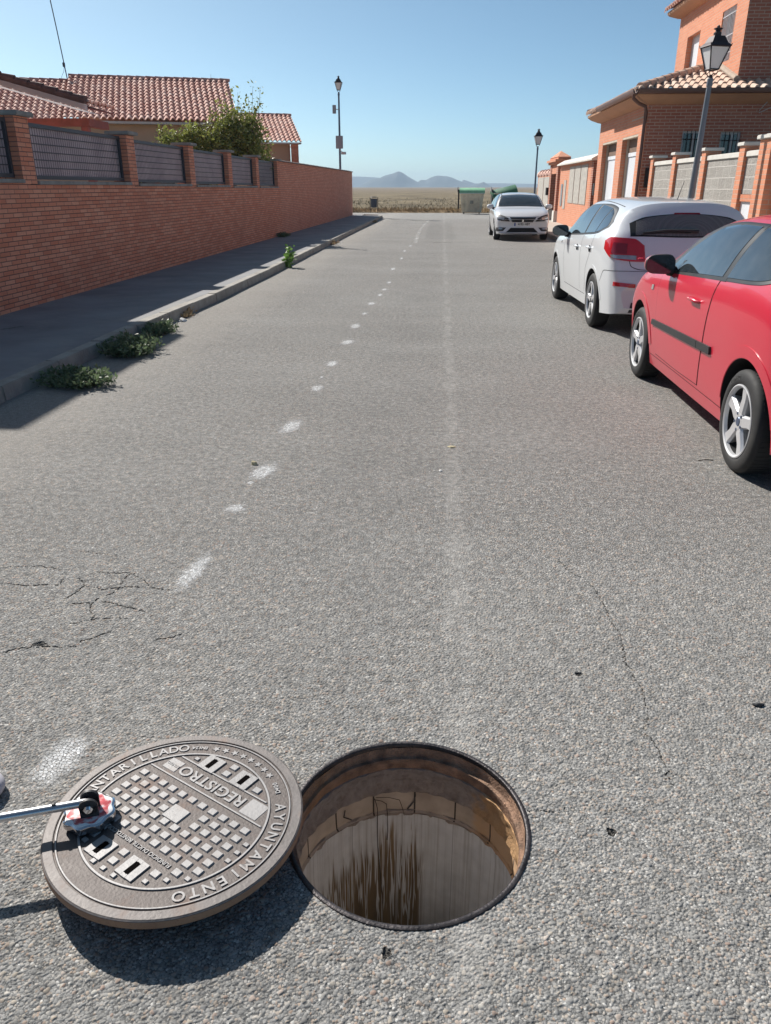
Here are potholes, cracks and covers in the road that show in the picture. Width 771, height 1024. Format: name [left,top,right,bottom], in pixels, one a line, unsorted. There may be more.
crack [559,561,674,786]
manhole cover [40,736,303,929]
crack [0,551,163,653]
